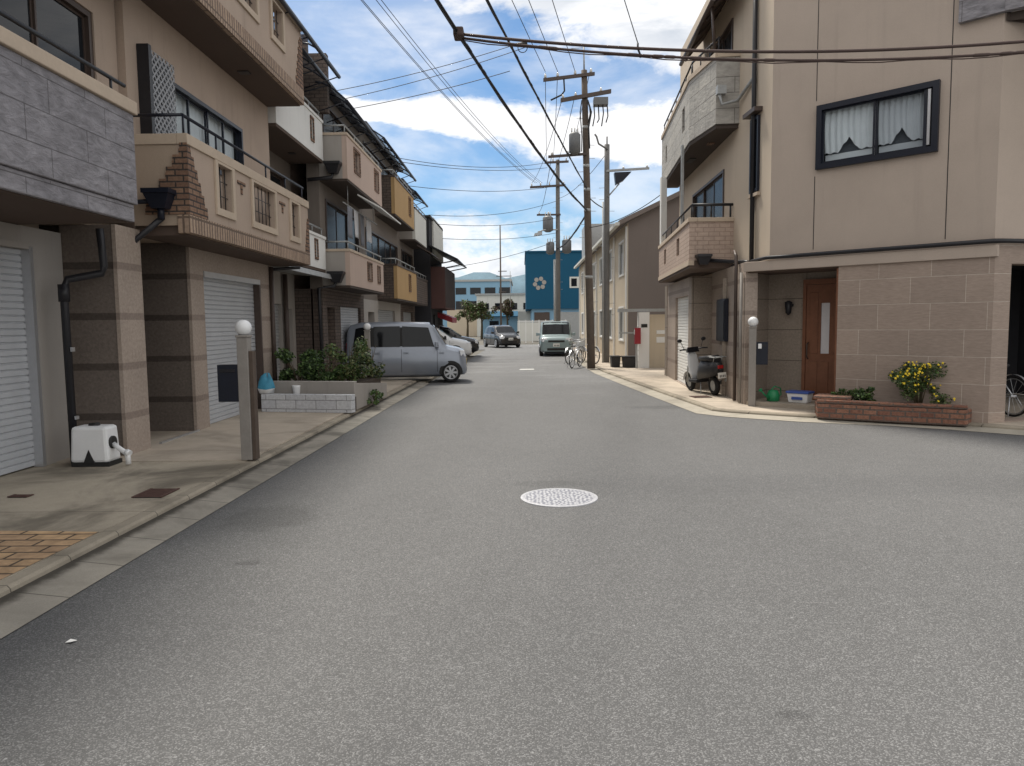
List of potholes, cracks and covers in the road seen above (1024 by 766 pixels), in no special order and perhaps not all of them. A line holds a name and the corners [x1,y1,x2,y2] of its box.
manhole cover [520,488,598,508]
